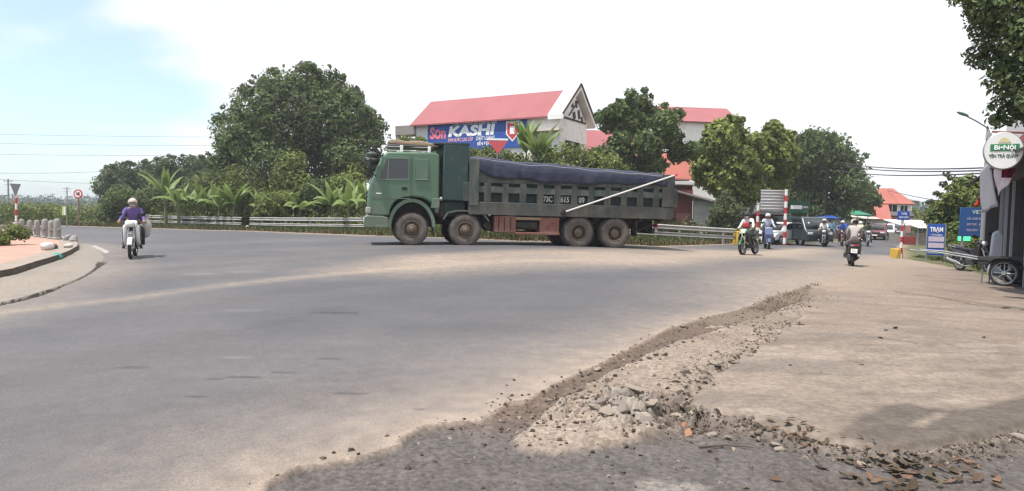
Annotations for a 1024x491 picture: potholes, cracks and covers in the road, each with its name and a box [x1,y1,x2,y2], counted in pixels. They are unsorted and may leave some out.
pothole [649,390,708,432]
